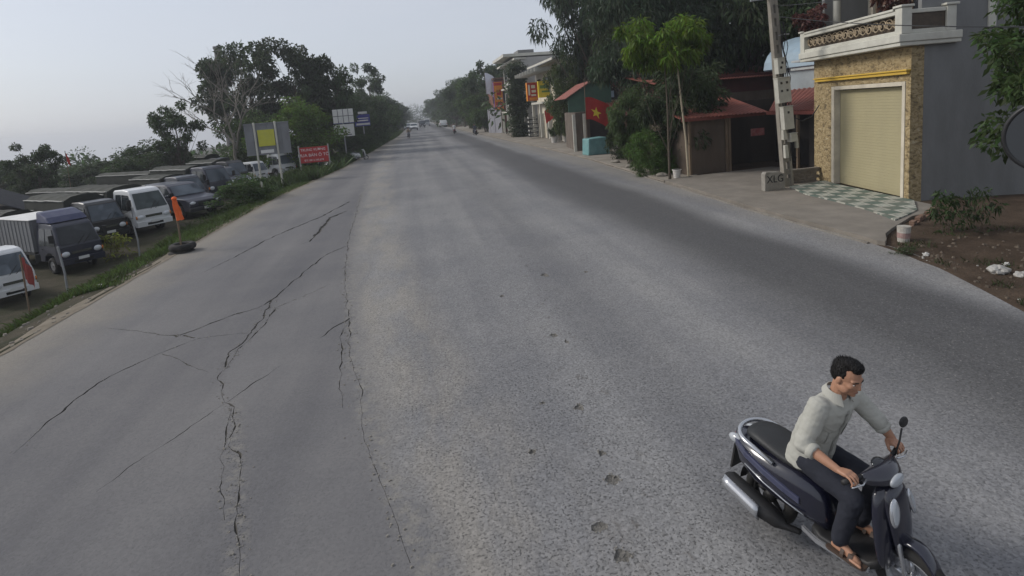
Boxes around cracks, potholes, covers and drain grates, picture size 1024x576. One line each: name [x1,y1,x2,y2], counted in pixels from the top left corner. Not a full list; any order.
pothole [591,520,608,533]
crack [19,247,344,576]
crack [211,194,418,569]
pothole [603,472,622,487]
pothole [614,546,635,564]
